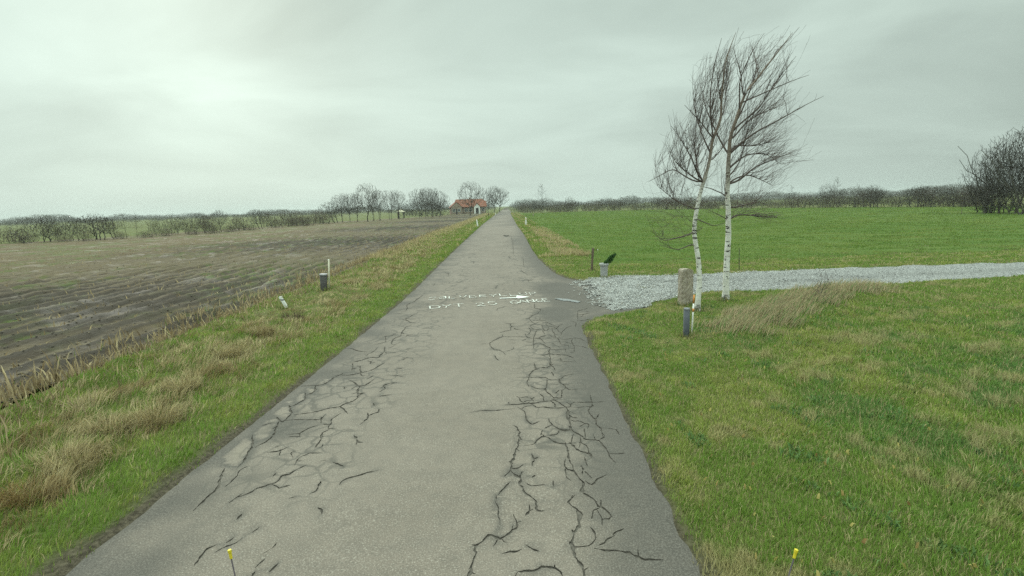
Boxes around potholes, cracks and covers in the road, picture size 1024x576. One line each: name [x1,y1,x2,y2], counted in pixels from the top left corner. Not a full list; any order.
crack [193,262,474,576]
crack [467,303,663,576]
